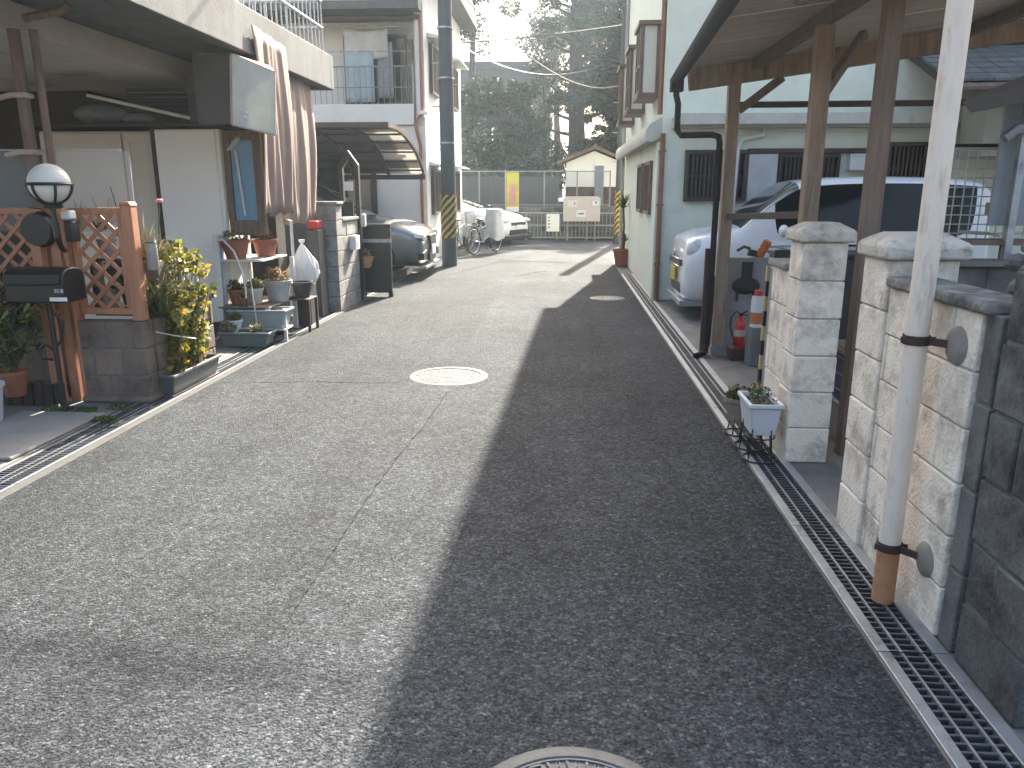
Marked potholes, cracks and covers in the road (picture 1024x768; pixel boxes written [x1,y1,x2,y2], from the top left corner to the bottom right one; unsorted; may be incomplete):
manhole cover [493,747,644,768]
drain grate [90,389,194,428]
drain grate [878,652,1024,768]
drain grate [744,454,840,528]
manhole cover [410,367,488,385]
crack [284,393,447,631]
drain grate [792,525,948,657]
drain grate [0,426,123,486]
